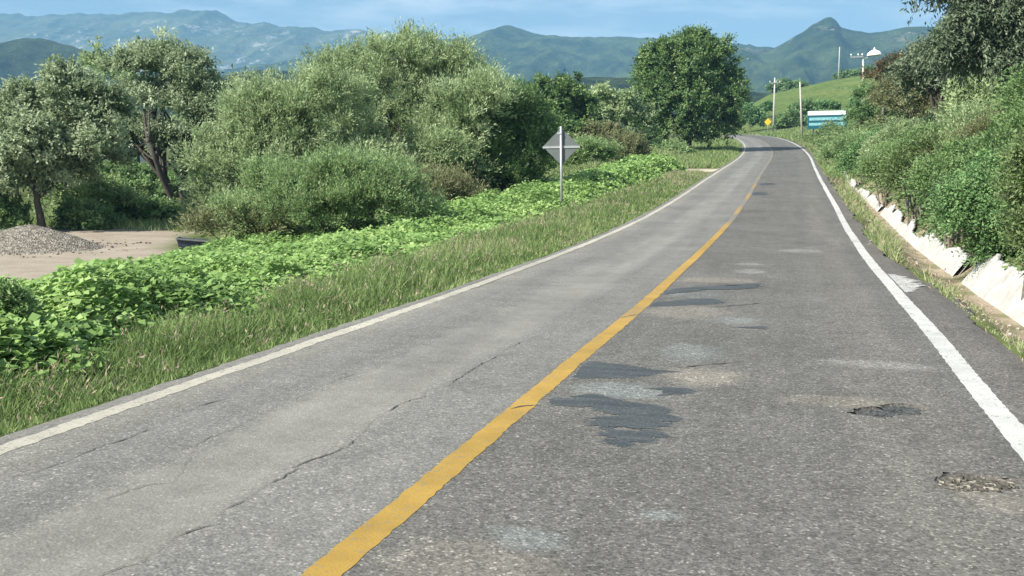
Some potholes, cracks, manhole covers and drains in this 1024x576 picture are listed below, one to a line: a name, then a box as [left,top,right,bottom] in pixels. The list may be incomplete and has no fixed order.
pothole [933,473,1024,493]
crack [100,342,520,576]
crack [16,398,226,476]
pothole [847,403,932,419]
